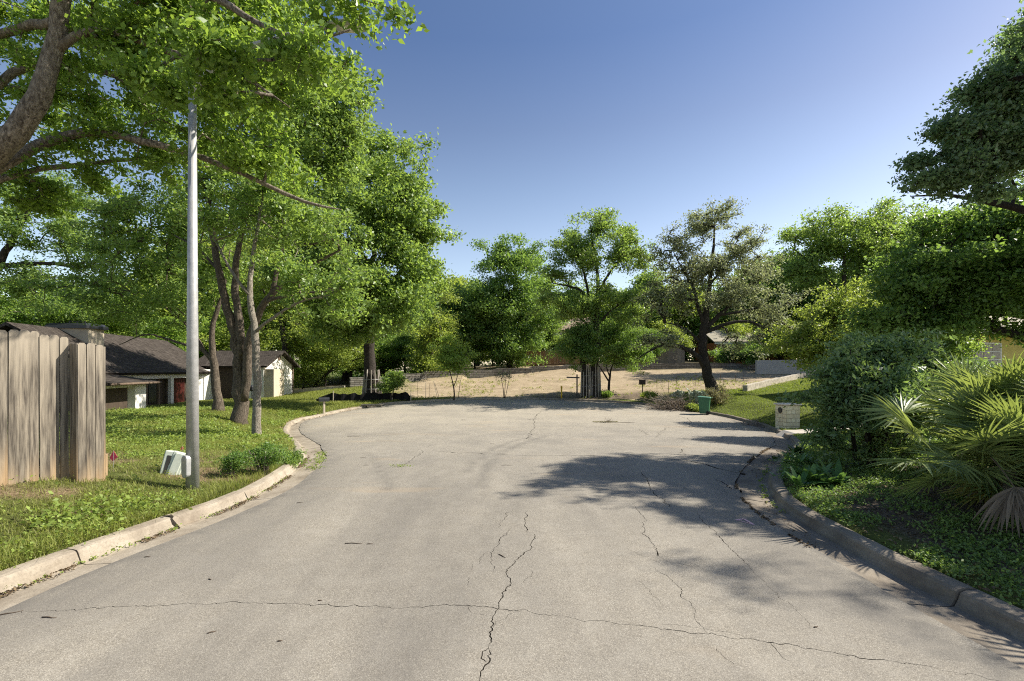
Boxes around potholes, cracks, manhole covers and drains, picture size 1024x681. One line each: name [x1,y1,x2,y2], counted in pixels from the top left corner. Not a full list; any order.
crack [21,411,998,681]
